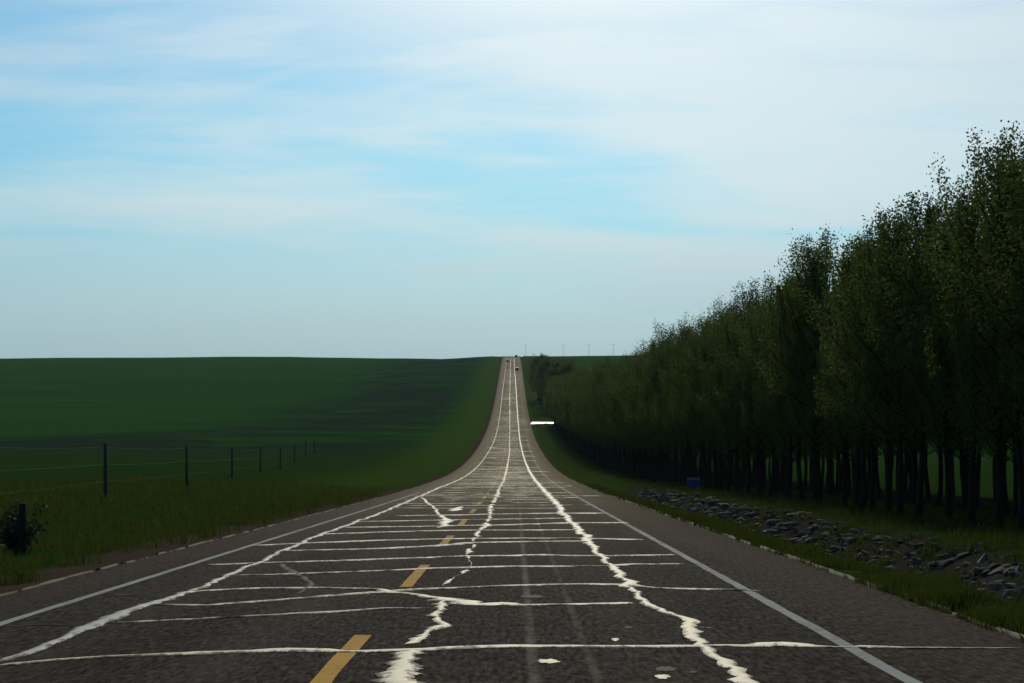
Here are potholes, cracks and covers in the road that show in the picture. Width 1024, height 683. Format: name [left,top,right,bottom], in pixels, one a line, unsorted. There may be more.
crack [0,359,1013,683]
